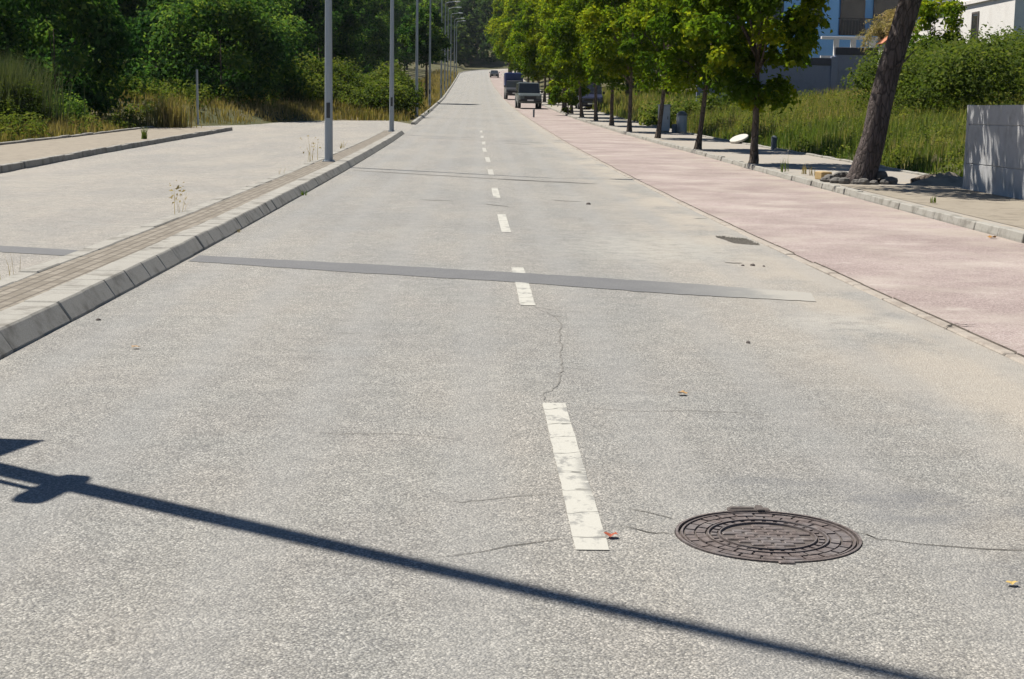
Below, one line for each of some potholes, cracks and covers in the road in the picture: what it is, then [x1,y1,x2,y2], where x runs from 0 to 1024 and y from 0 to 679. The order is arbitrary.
crack [857,532,1014,550]
manhole cover [675,505,862,565]
crack [440,537,568,557]
crack [540,307,575,403]
